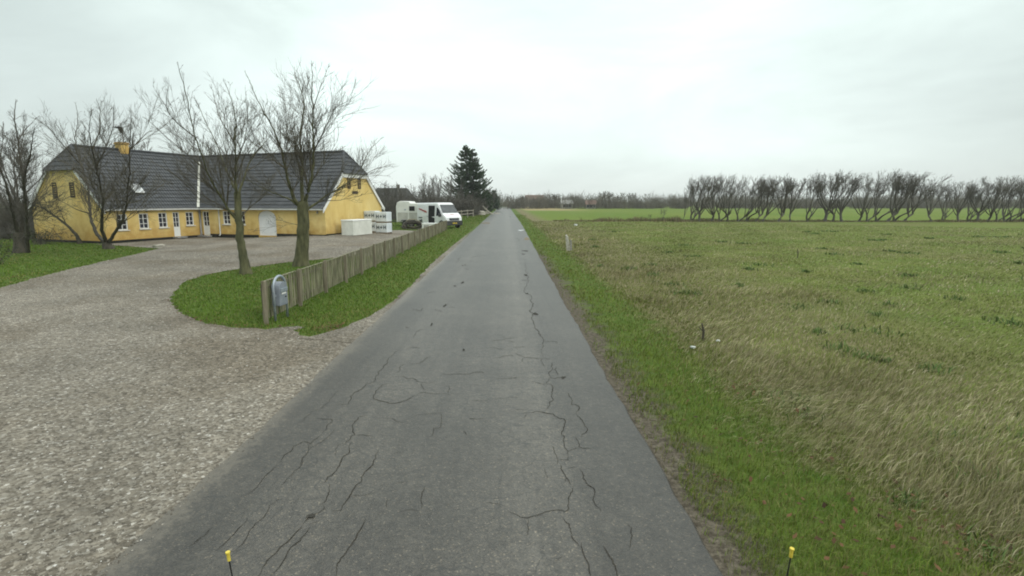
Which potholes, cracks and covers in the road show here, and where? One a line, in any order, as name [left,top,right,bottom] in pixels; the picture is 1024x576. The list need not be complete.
crack [190,292,474,576]
crack [475,260,633,576]
